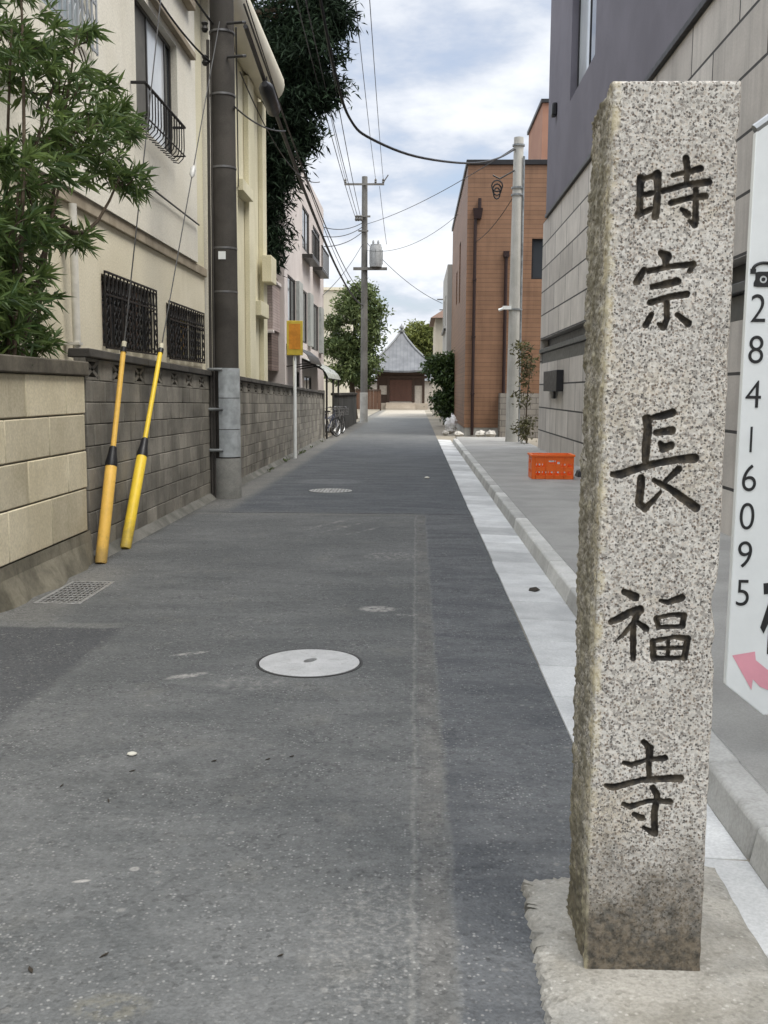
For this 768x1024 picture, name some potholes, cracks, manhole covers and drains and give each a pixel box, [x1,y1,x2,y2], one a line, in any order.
manhole cover [256,649,363,678]
drain grate [33,581,115,604]
